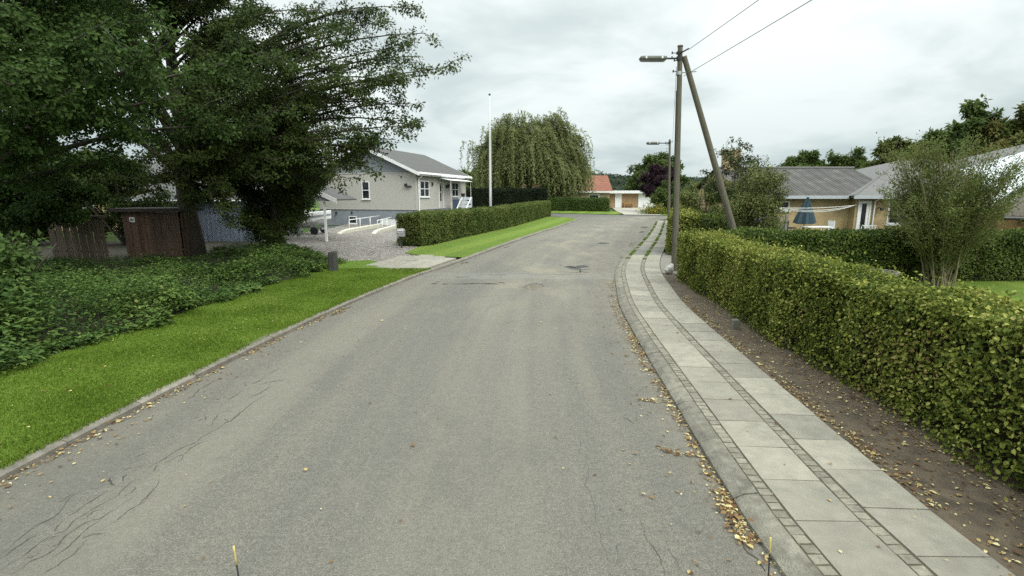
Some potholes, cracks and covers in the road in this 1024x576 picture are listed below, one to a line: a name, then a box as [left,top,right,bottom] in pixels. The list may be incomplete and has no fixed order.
crack [5,465,159,575]
crack [138,371,284,470]
